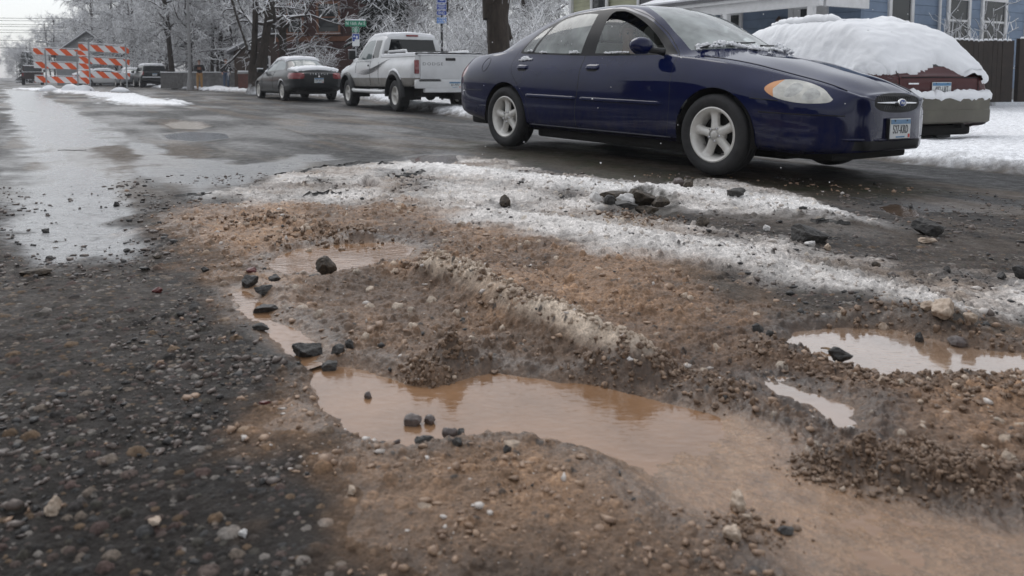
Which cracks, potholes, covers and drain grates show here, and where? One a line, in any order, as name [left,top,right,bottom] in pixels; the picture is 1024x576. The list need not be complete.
pothole [254,230,431,275]
pothole [776,309,1024,376]
pothole [218,281,343,372]
pothole [293,352,1024,576]
